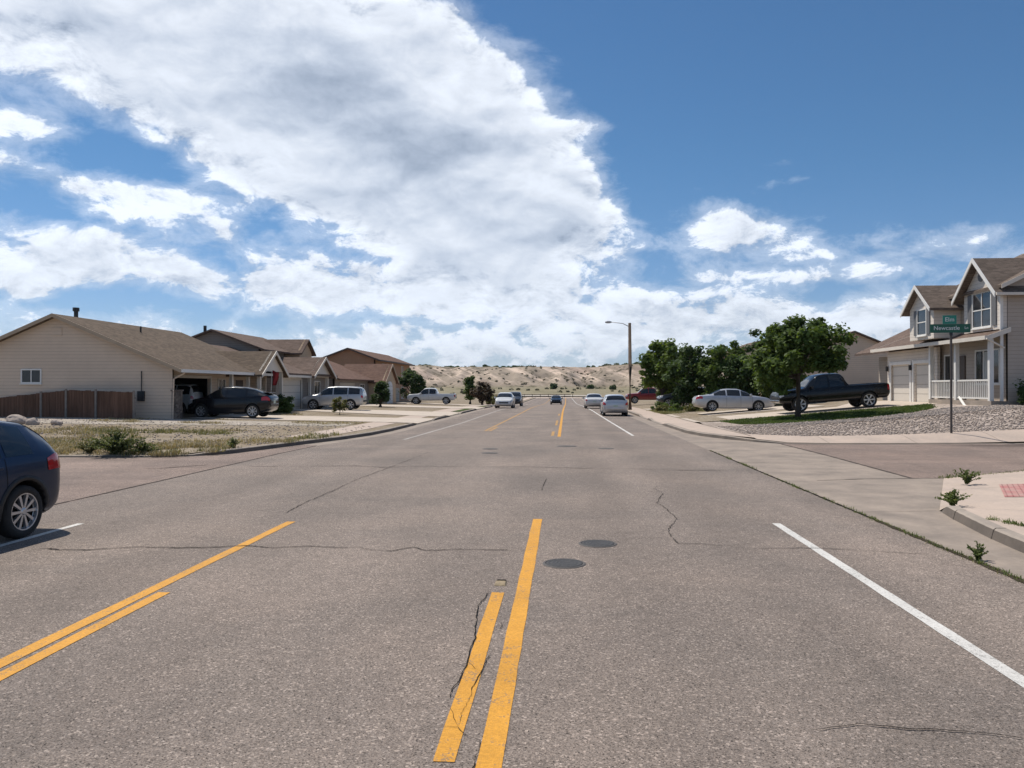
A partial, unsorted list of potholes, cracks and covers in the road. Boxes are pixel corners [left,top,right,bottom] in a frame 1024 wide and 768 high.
manhole cover [578,540,617,548]
crack [813,723,1021,738]
crack [371,466,922,554]
manhole cover [543,558,586,569]
crack [436,591,502,768]
